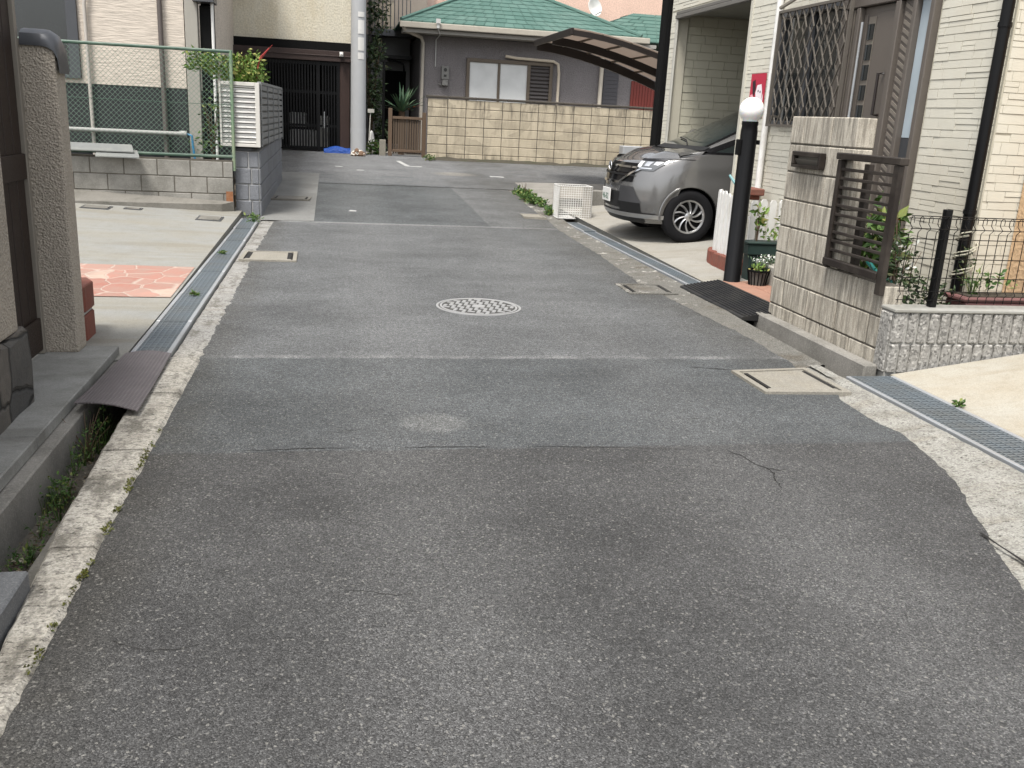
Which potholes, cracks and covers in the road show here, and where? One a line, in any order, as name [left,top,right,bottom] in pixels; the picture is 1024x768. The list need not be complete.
drain grate [180,271,225,297]
drain grate [656,269,701,285]
drain grate [212,240,246,259]
drain grate [131,321,192,357]
crack [107,640,199,652]
drain grate [582,232,616,243]
drain grate [198,254,236,276]
drain grate [846,376,1003,433]
drain grate [224,228,253,243]
drain grate [156,293,211,327]
drain grate [567,222,596,232]
